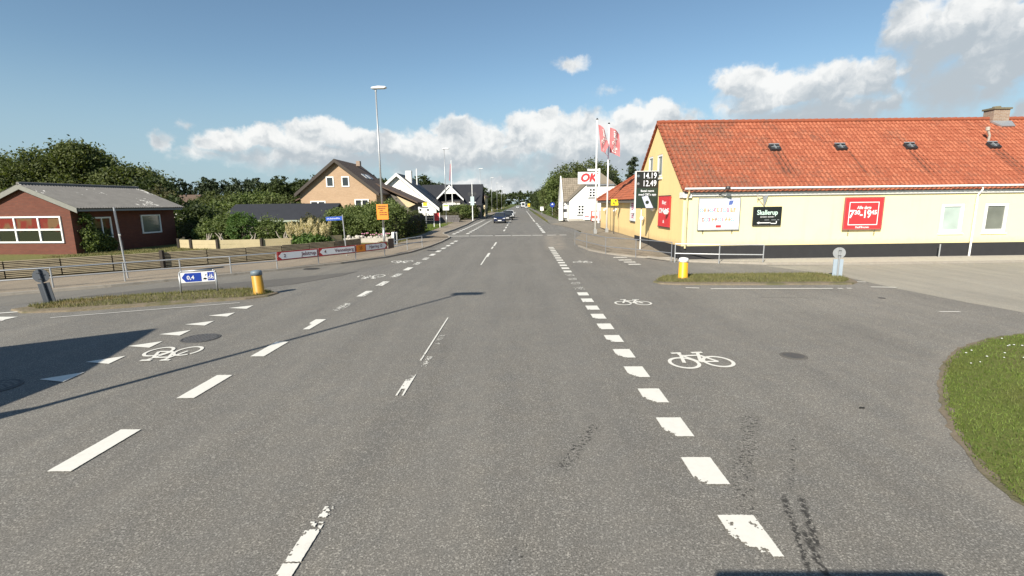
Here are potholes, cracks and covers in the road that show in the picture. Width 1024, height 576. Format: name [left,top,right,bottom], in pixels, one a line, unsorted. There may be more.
manhole cover [180,333,221,343]
manhole cover [779,352,808,360]
manhole cover [0,379,24,392]
